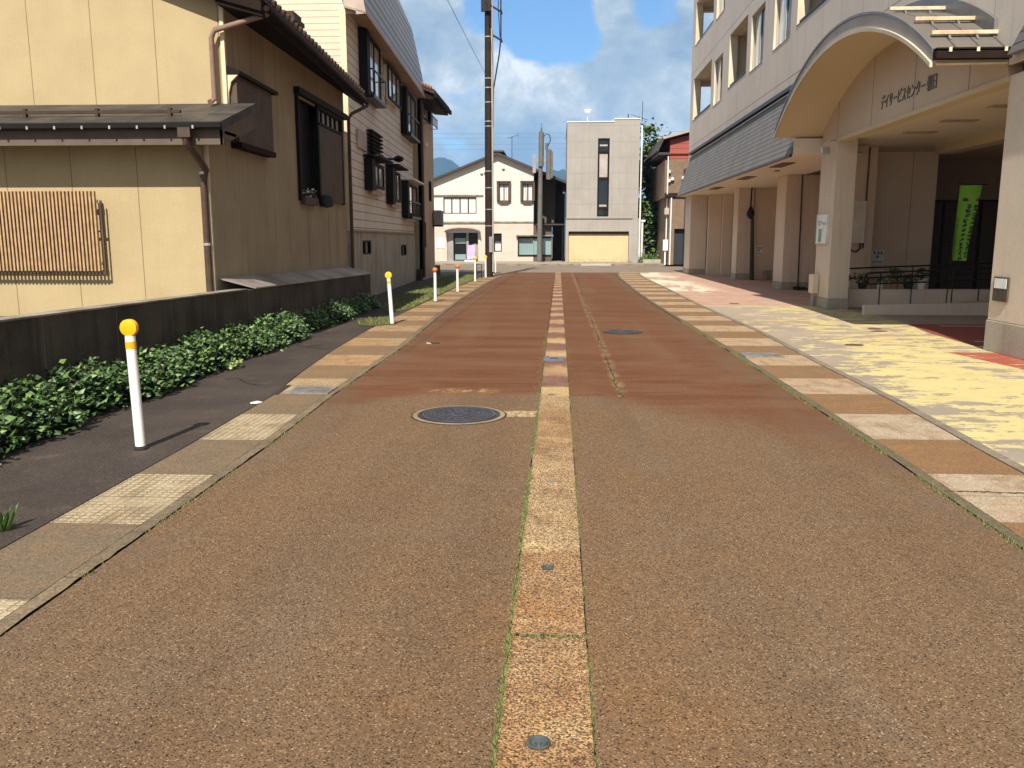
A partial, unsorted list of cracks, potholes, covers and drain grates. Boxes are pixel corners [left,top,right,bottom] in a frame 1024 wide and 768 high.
drain grate [285,386,338,394]
manhole cover [411,405,507,425]
